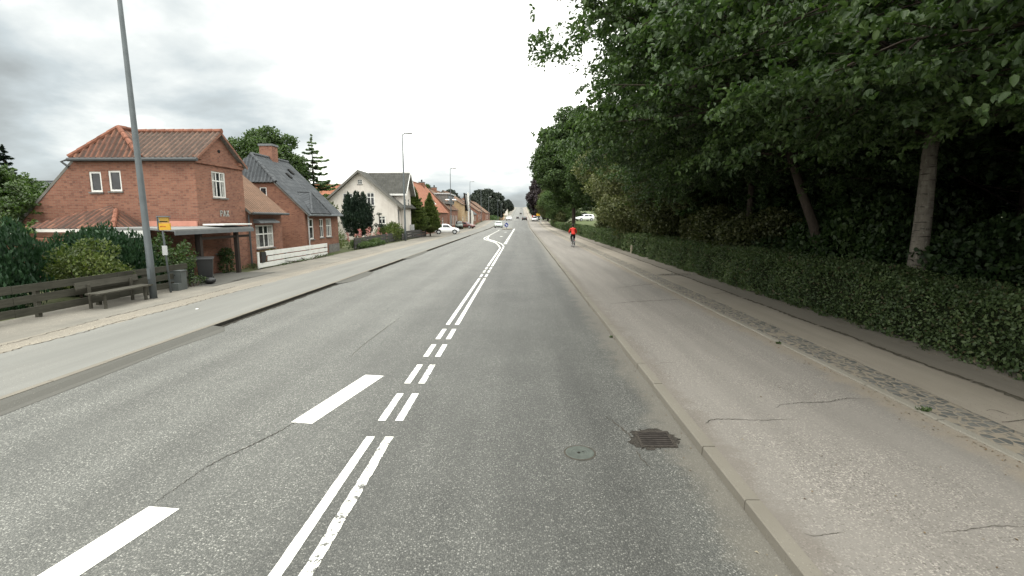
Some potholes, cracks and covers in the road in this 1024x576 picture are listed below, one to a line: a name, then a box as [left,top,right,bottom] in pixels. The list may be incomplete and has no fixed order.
drain grate [633,431,678,448]
manhole cover [564,445,596,460]
crack [156,419,301,502]
